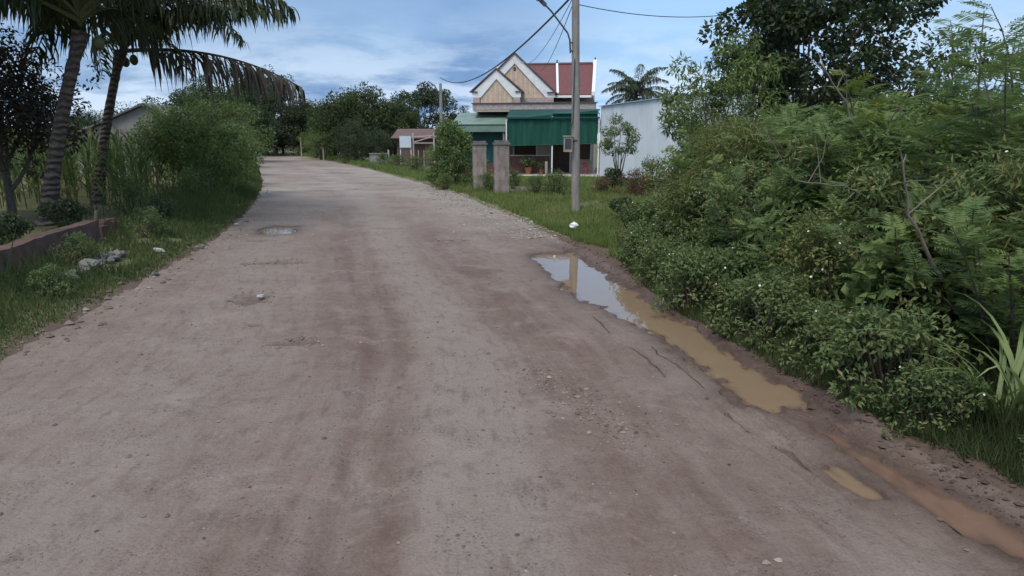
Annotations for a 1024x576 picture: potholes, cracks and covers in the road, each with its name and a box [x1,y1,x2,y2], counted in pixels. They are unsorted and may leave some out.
crack [721,412,812,473]
pothole [230,292,273,306]
crack [630,345,705,389]
pothole [257,225,300,235]
pothole [822,463,892,501]
pothole [527,249,812,414]
pothole [265,338,320,346]
